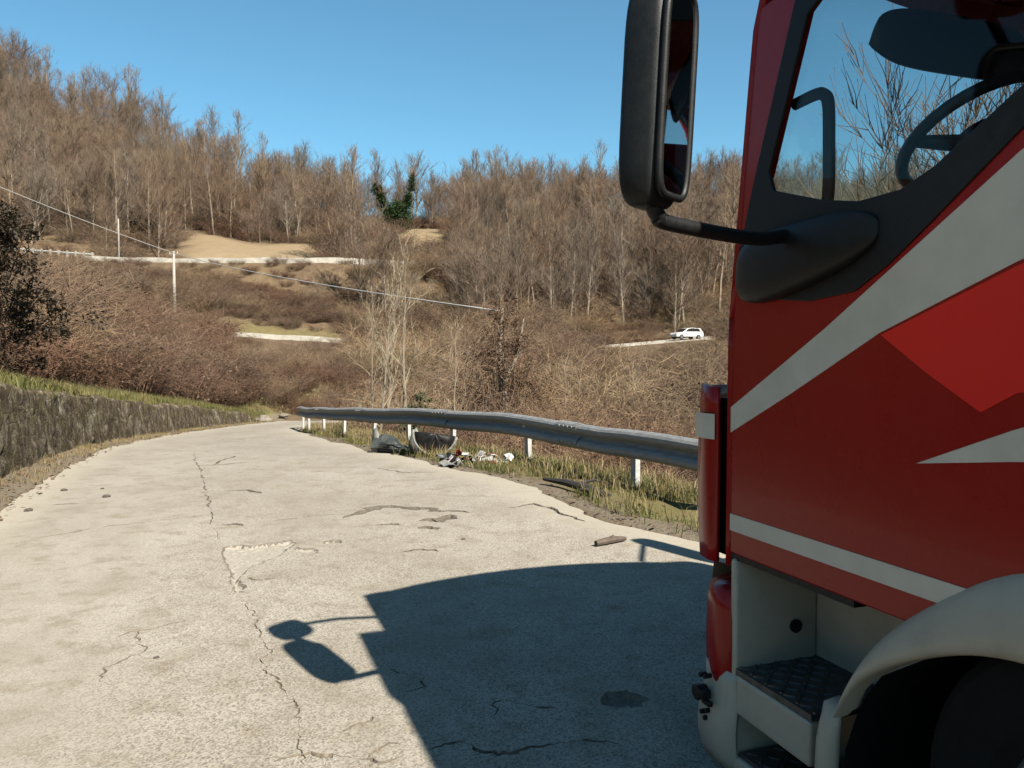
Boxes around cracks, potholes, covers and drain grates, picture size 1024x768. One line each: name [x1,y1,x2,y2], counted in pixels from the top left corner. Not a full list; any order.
crack [275,505,470,530]
pothole [600,690,649,708]
crack [99,621,184,685]
crack [511,503,584,521]
crack [430,738,620,756]
